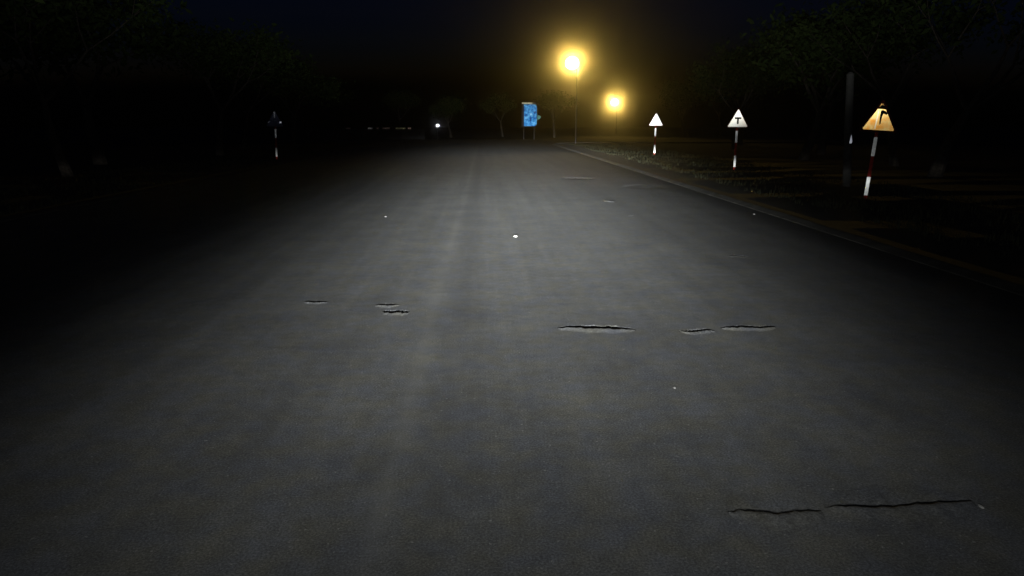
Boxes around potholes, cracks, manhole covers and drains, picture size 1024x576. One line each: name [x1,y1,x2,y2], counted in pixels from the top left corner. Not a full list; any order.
crack [679,323,776,335]
crack [725,483,978,538]
crack [558,323,636,334]
